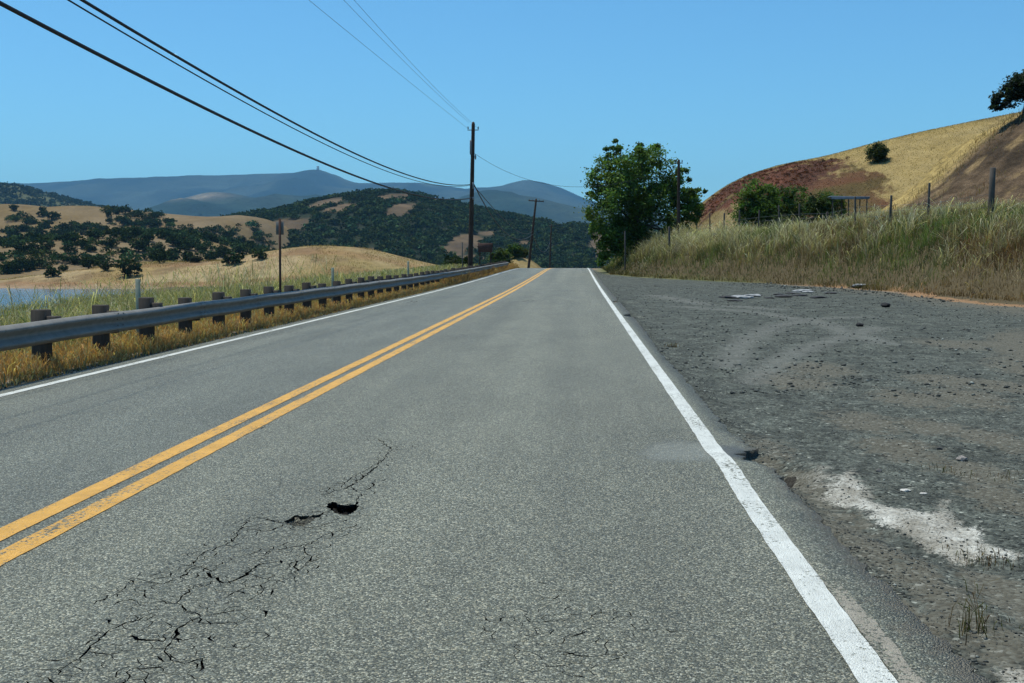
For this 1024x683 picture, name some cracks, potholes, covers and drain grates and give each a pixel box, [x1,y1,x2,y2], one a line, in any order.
crack [481,583,670,678]
pothole [284,514,321,528]
crack [26,438,413,683]
pothole [327,502,359,522]
